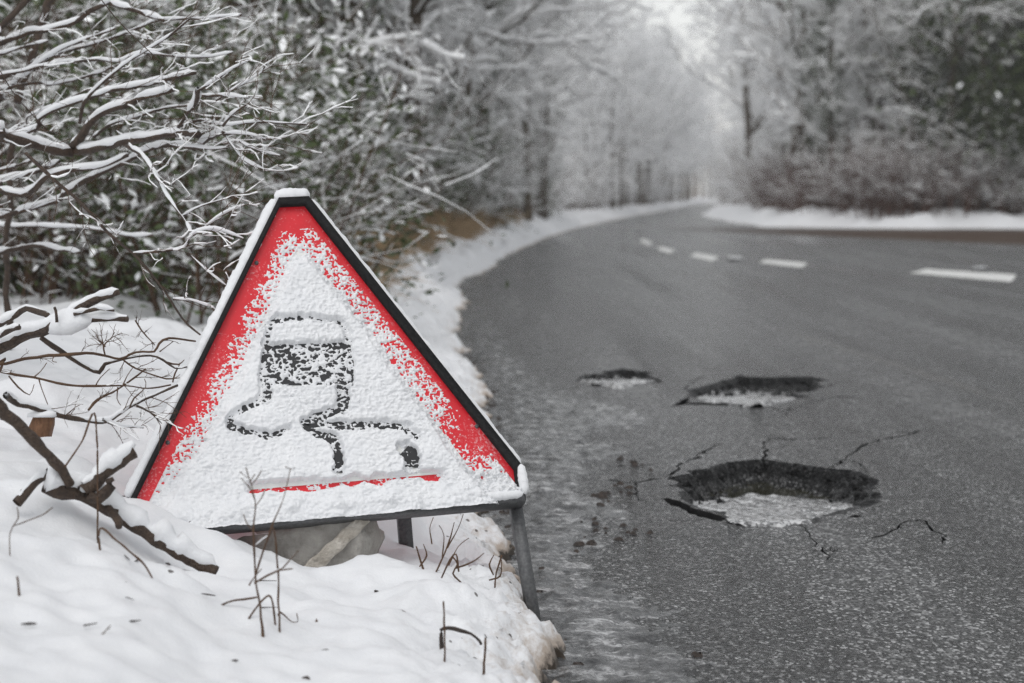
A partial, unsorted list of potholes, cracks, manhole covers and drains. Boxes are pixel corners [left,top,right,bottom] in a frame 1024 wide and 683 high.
pothole [575,367,663,390]
crack [782,524,838,560]
crack [872,519,947,545]
pothole [659,459,884,527]
pothole [671,374,828,408]
crack [762,429,926,473]
